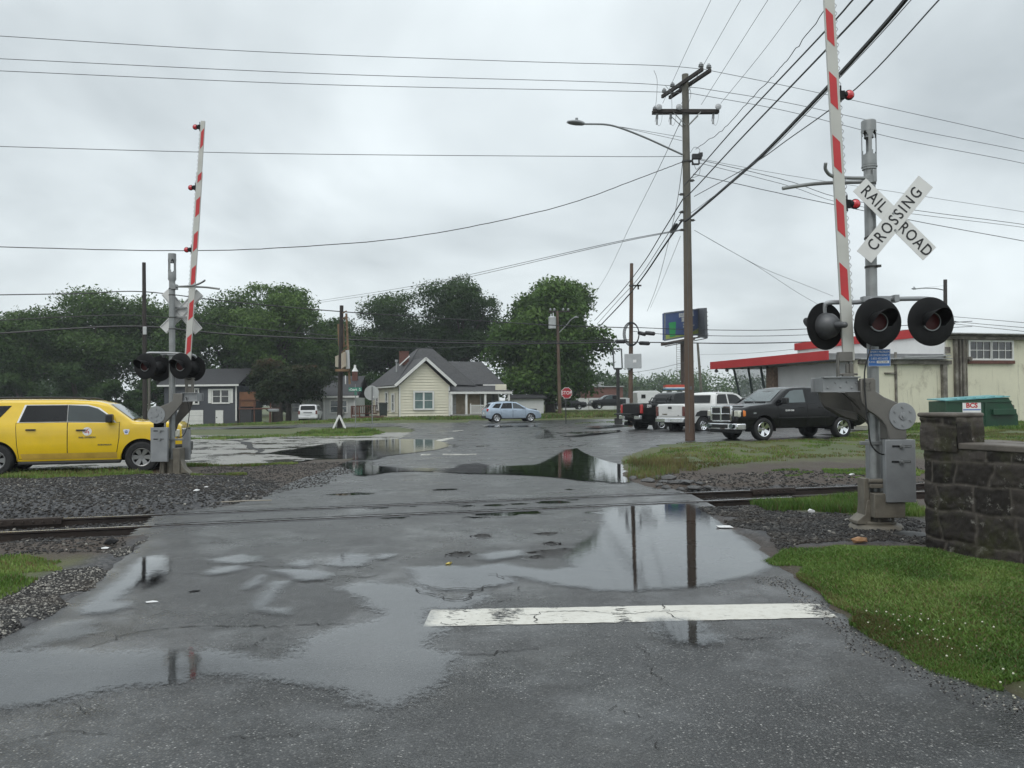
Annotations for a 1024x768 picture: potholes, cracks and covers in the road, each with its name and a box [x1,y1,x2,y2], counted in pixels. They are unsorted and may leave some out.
crack [499,586,683,623]
crack [607,645,672,750]
crack [1,702,128,742]
